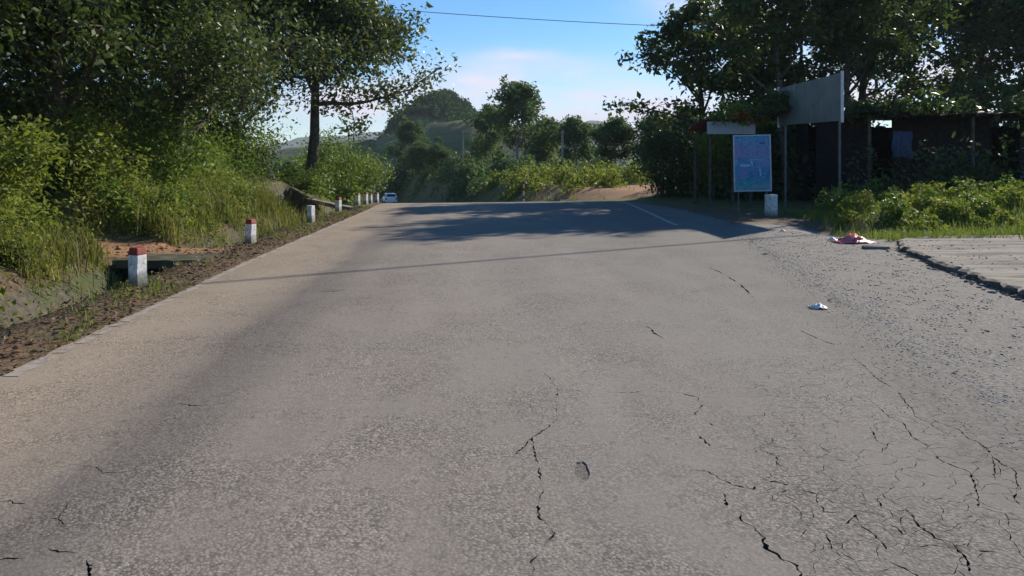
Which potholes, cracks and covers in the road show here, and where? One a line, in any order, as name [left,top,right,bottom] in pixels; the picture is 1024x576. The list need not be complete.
crack [748,359,1024,576]
pothole [574,461,590,480]
crack [618,391,712,446]
crack [696,448,819,576]
crack [48,549,93,576]
crack [515,373,558,571]
